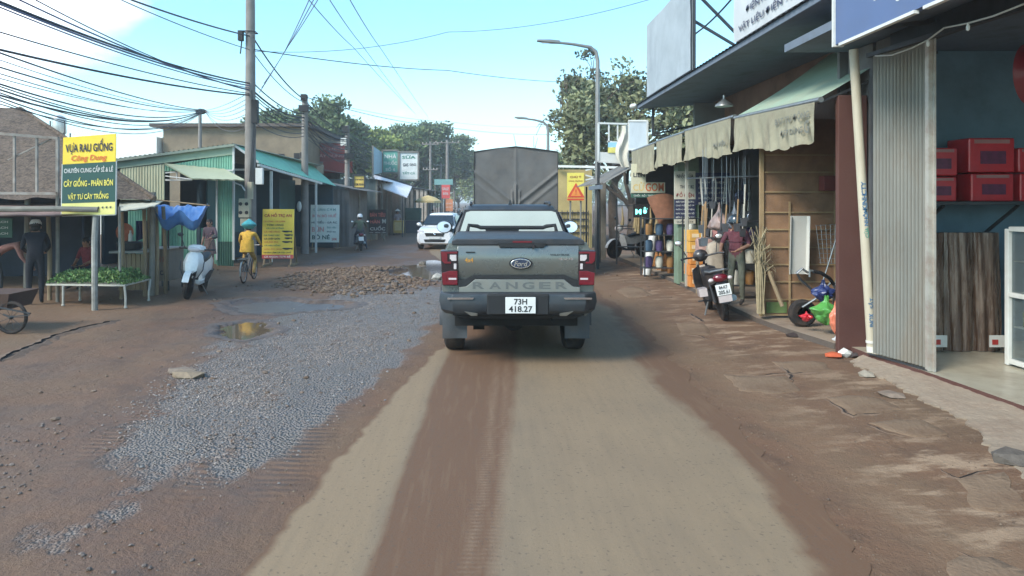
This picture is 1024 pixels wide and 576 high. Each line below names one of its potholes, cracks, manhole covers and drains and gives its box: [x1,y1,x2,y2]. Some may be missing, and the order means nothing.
crack [0,320,121,362]
pothole [203,319,291,342]
crack [739,361,902,436]
crack [940,469,1001,479]
